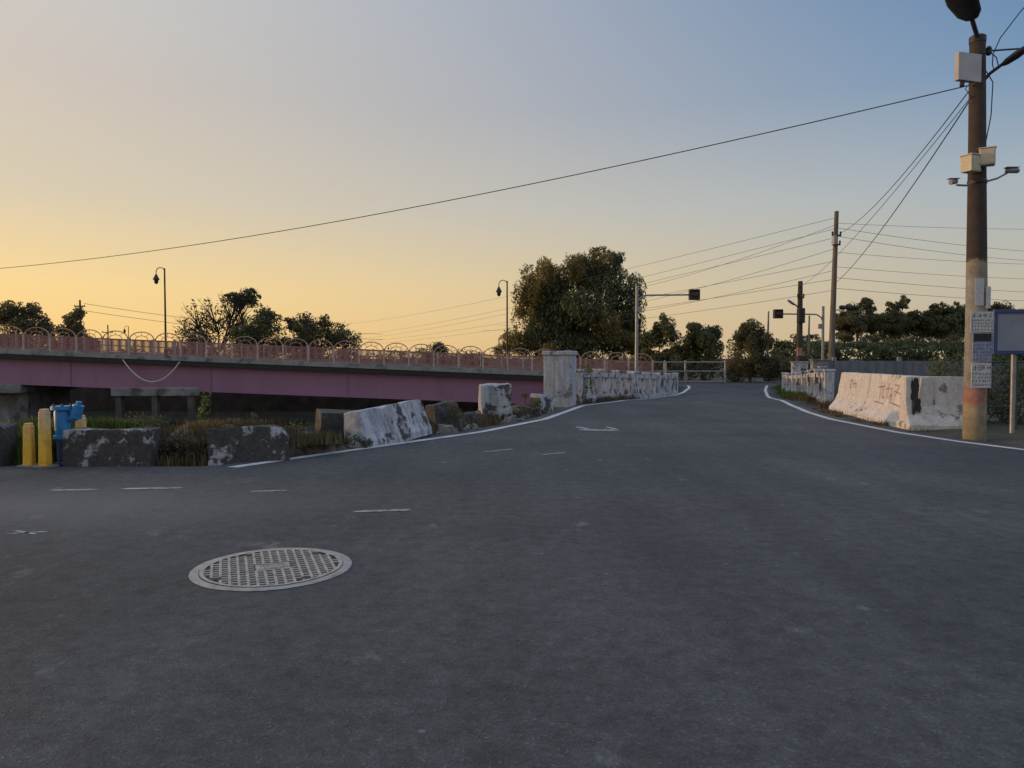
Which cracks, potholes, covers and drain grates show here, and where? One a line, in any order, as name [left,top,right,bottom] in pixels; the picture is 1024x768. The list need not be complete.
manhole cover [189,548,352,591]
